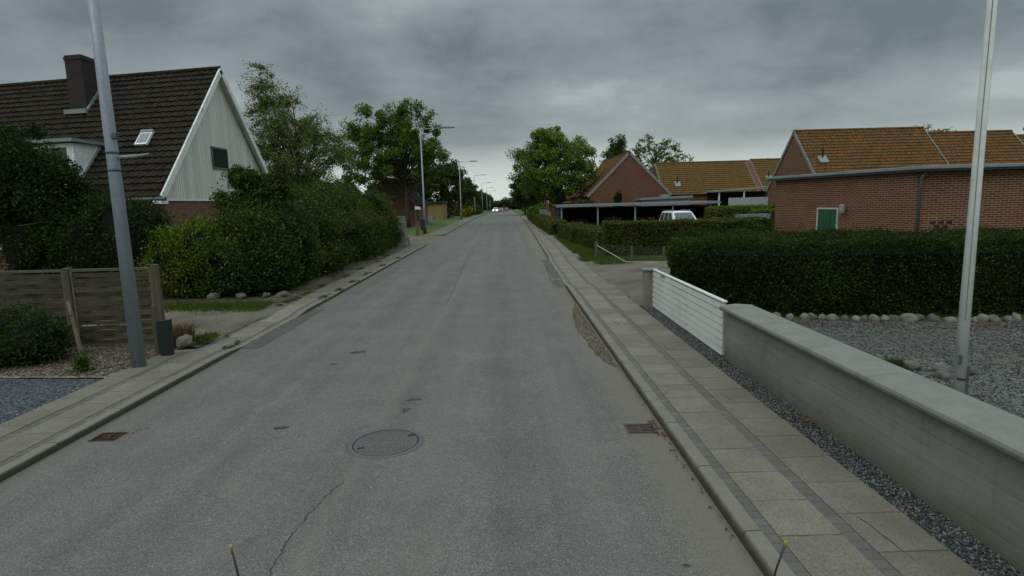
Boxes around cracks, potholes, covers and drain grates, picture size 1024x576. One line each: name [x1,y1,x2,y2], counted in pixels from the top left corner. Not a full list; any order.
manhole cover [347,428,424,459]
drain grate [615,421,664,438]
crack [269,480,345,576]
drain grate [87,432,128,442]
